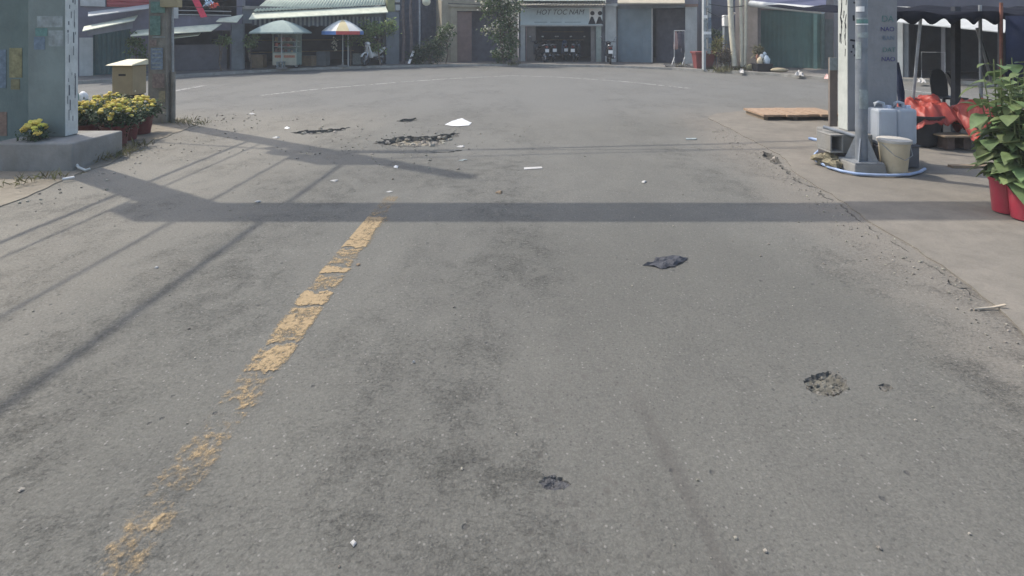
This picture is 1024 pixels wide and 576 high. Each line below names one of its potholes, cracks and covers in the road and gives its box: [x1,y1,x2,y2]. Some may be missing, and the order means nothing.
pothole [803,370,850,397]
pothole [292,127,350,135]
pothole [539,474,571,490]
pothole [374,132,460,147]
